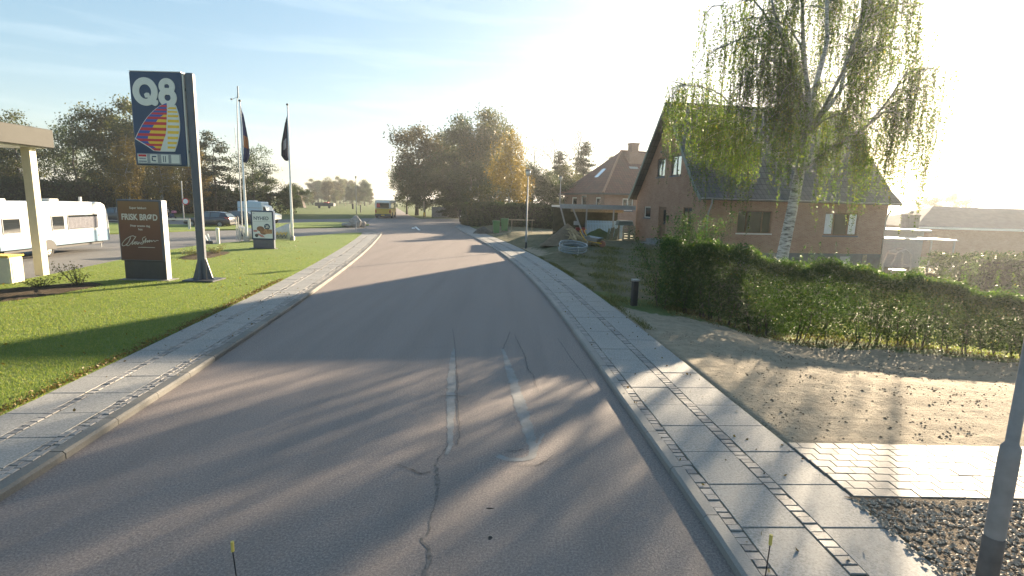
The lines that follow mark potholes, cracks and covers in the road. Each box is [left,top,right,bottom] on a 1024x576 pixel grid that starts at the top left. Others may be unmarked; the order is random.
crack [503,332,539,391]
crack [397,329,462,576]
